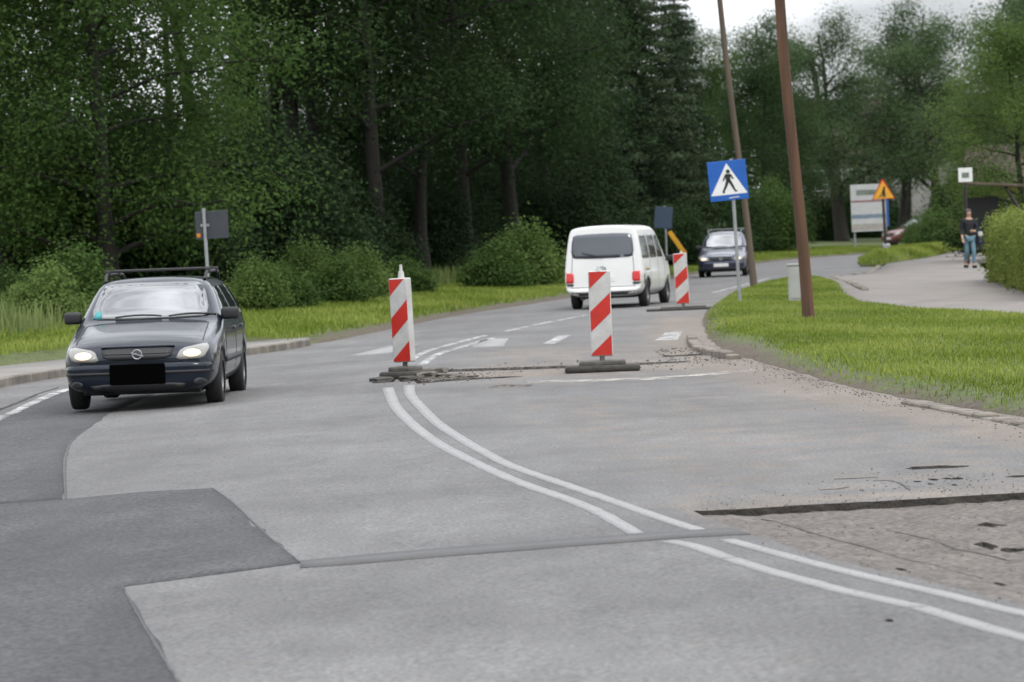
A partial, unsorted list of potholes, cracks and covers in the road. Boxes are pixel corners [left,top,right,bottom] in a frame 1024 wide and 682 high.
crack [820,477,910,491]
